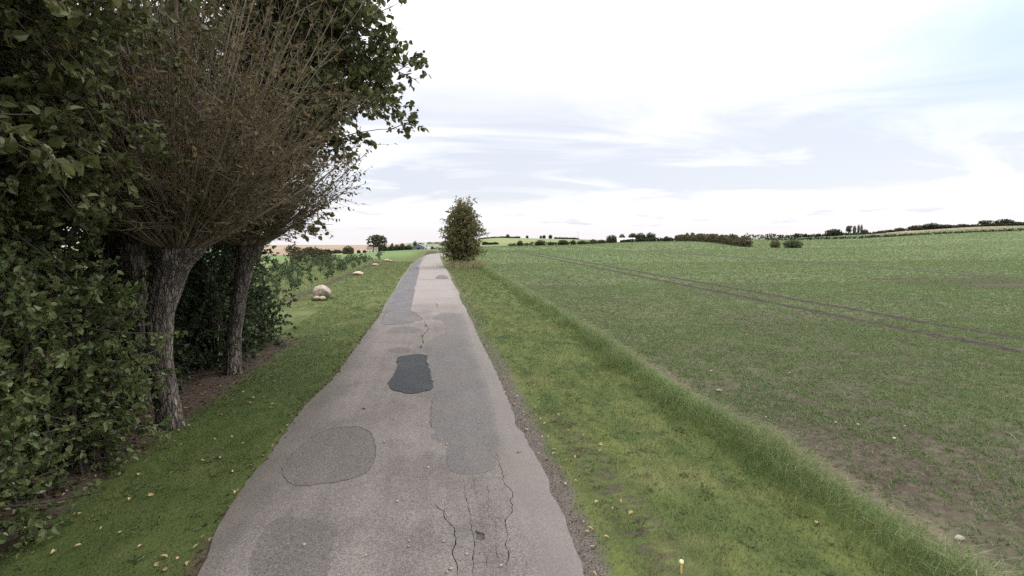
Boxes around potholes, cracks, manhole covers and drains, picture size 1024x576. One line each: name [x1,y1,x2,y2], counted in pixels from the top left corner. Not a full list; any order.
crack [431,454,514,575]
